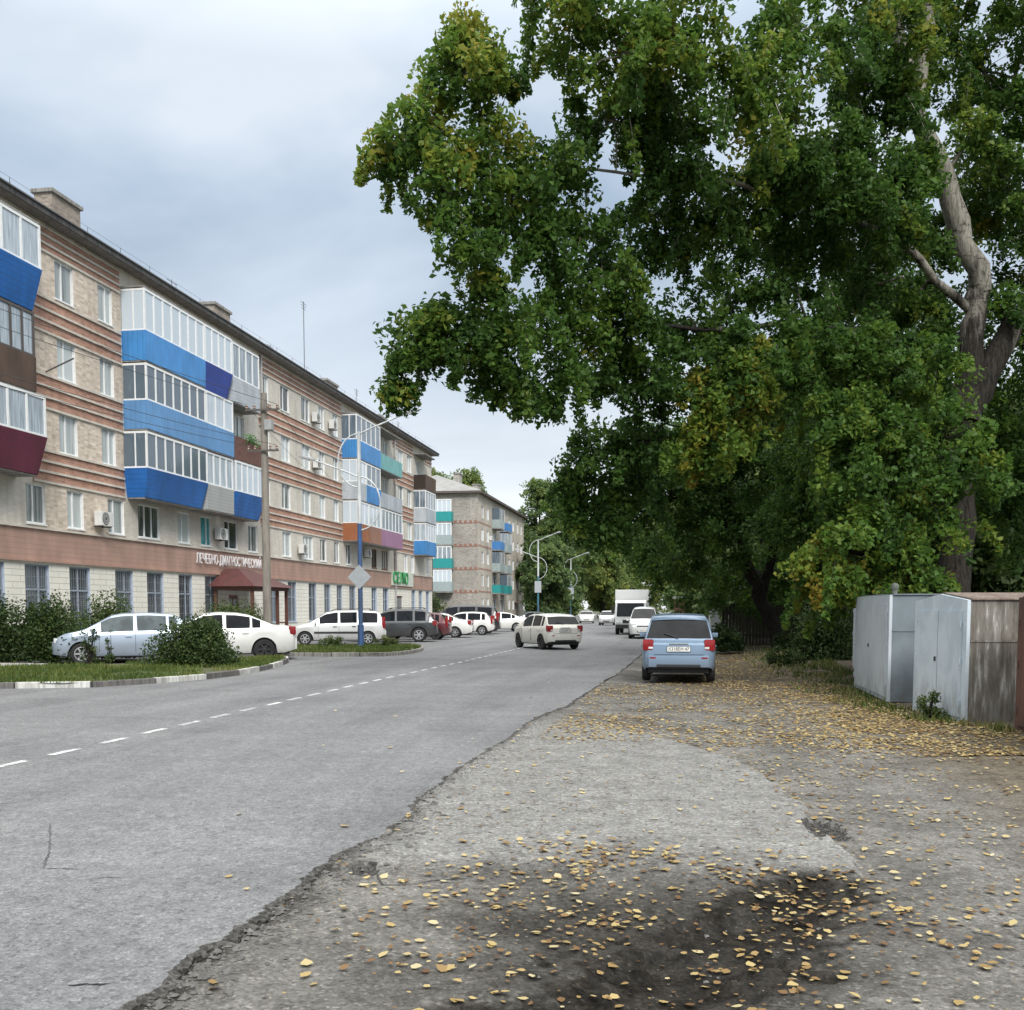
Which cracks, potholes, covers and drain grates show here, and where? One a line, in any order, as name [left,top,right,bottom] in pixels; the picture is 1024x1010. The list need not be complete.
pothole [801,817,854,841]
crack [42,824,122,878]
